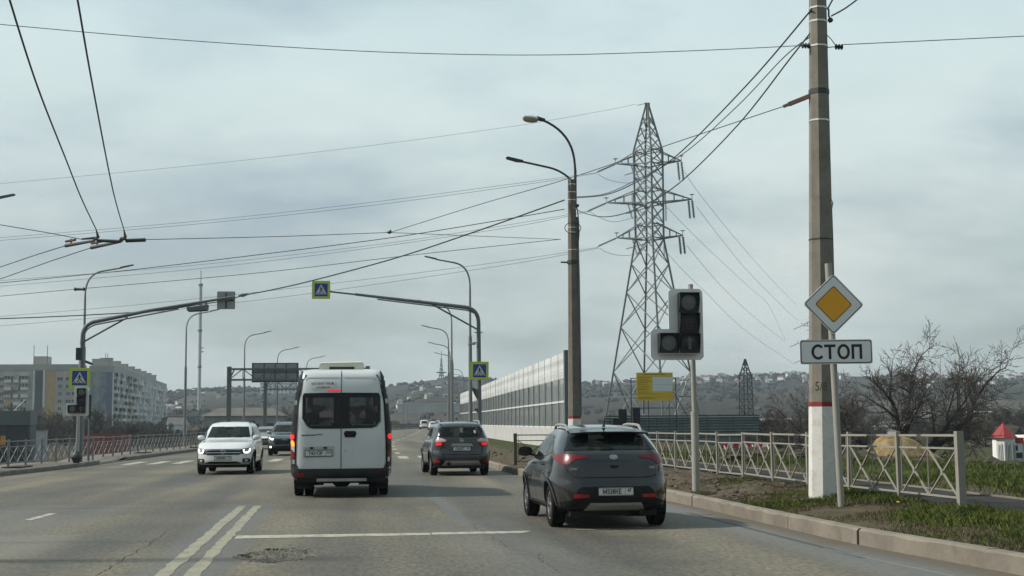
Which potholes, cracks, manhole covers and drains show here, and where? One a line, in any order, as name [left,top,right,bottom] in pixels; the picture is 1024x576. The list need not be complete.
pothole [233,547,316,564]
